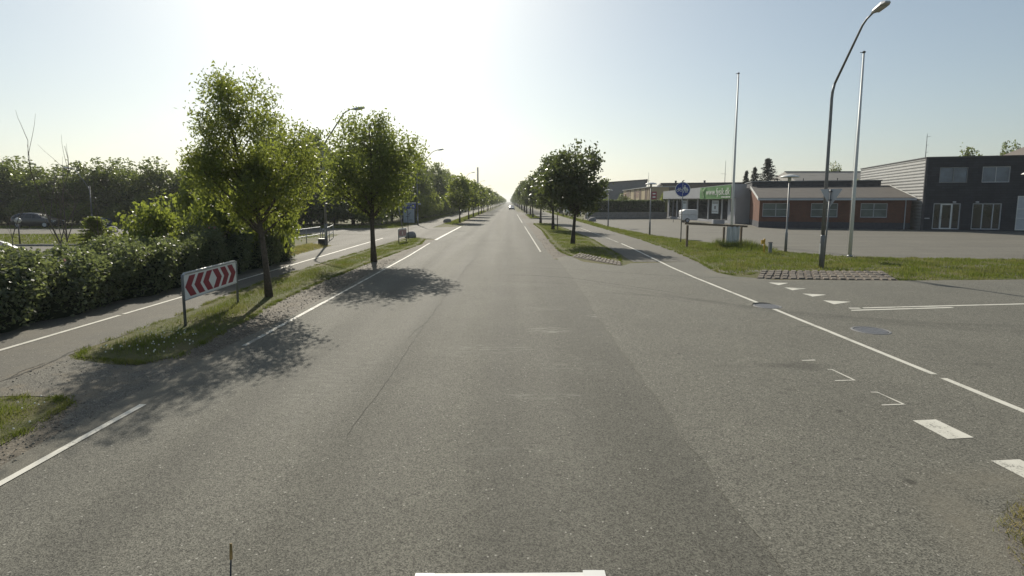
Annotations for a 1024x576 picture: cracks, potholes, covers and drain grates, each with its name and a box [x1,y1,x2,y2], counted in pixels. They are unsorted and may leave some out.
manhole cover [850,326,892,335]
crack [347,264,470,435]
